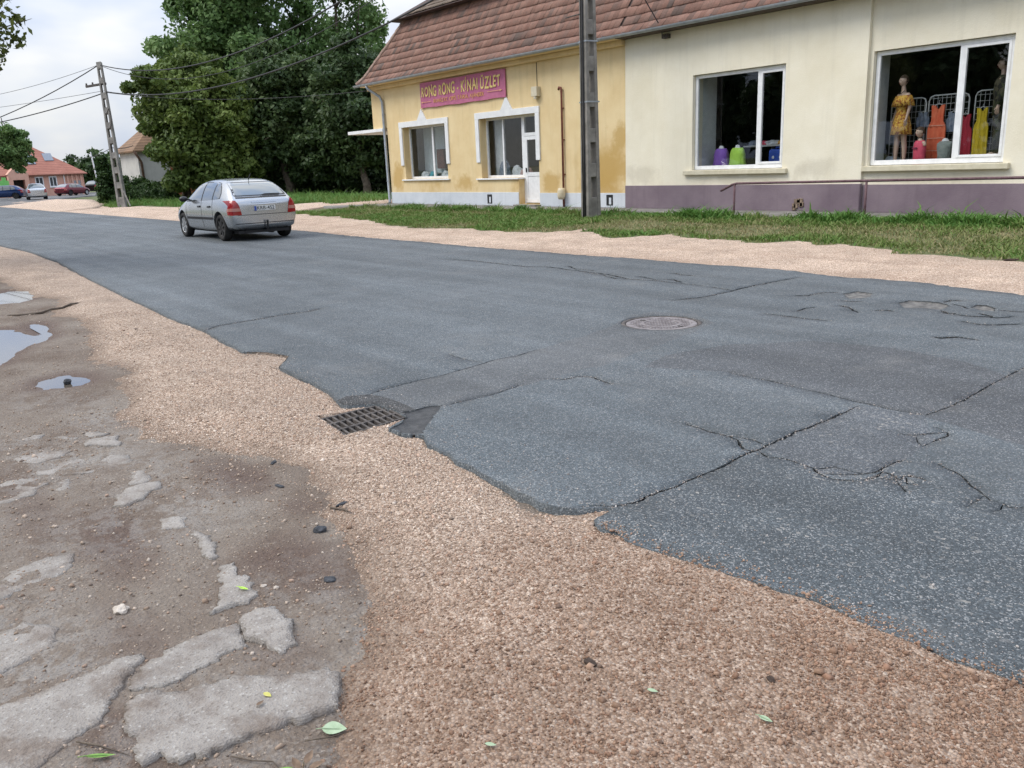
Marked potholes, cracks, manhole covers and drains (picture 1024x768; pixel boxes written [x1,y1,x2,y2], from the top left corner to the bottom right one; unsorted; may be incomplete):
crack [901,369,1021,445]
drain grate [320,406,405,435]
manhole cover [621,316,702,330]
pothole [900,300,949,310]
crack [935,300,1018,340]
crack [589,408,921,507]
